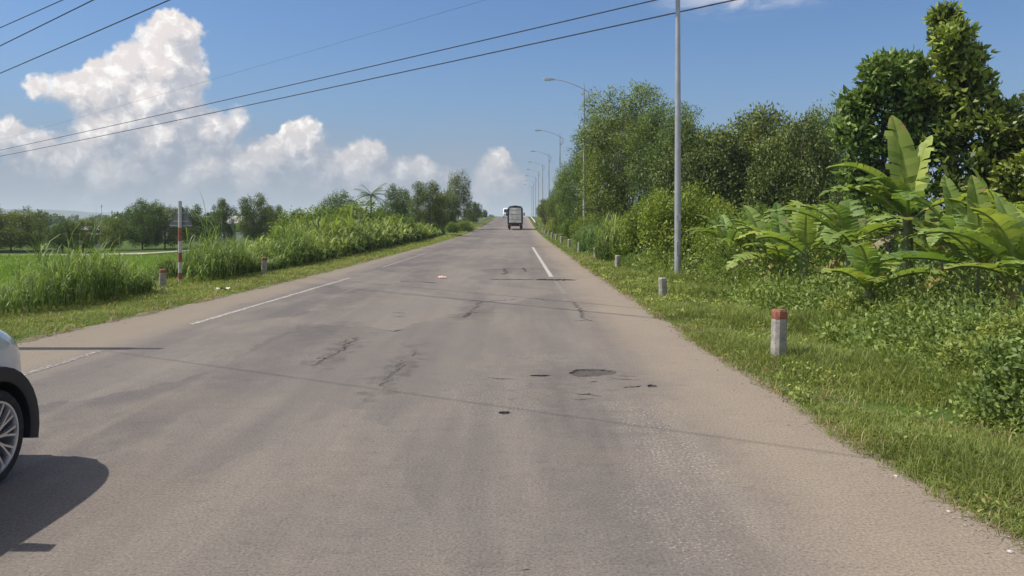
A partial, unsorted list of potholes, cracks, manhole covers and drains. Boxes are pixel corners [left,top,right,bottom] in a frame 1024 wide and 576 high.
crack [310,337,360,366]
crack [379,352,417,389]
crack [451,299,517,318]
pothole [569,369,617,377]
crack [535,298,596,322]
crack [492,268,572,281]
